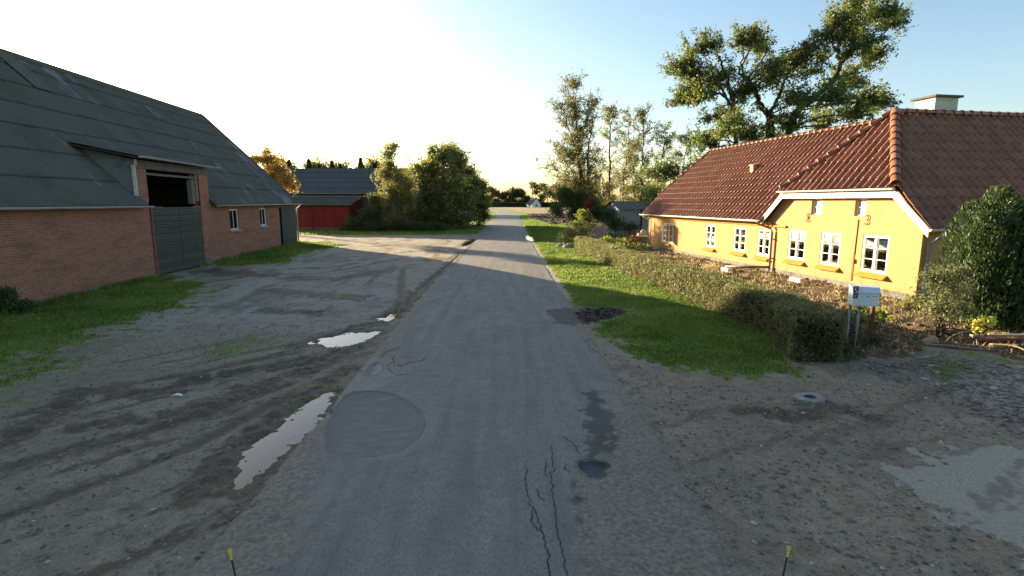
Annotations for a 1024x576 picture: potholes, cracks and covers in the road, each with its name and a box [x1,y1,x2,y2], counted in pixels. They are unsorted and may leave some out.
pothole [575,459,613,479]
crack [524,436,581,576]
manhole cover [793,392,825,403]
crack [382,347,440,377]
